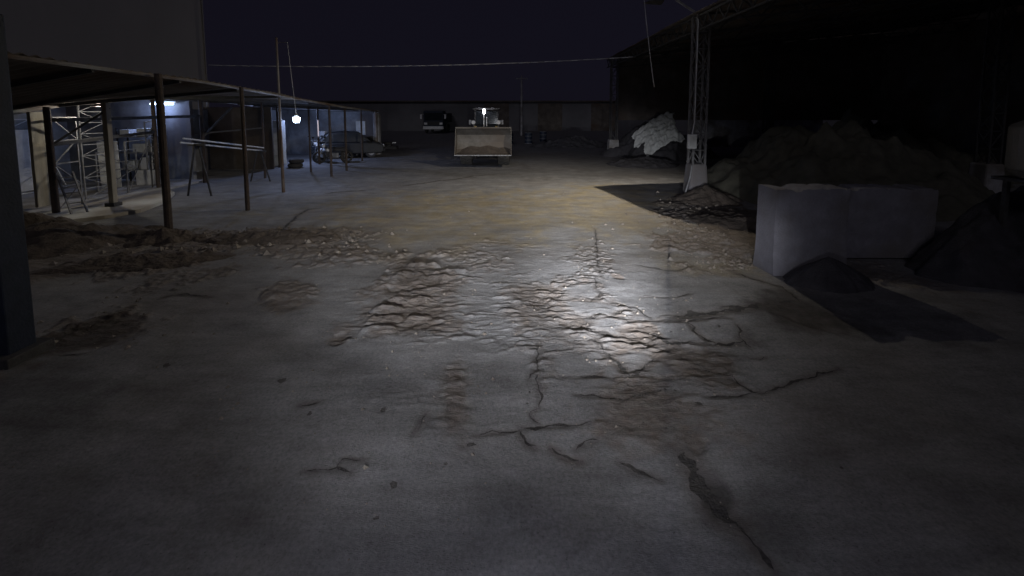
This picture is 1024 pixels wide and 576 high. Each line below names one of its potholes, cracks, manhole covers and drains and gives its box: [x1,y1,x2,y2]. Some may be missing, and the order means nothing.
crack [306,458,359,472]
crack [562,229,835,400]
pothole [257,281,314,312]
crack [480,375,597,461]
crack [678,452,774,570]
